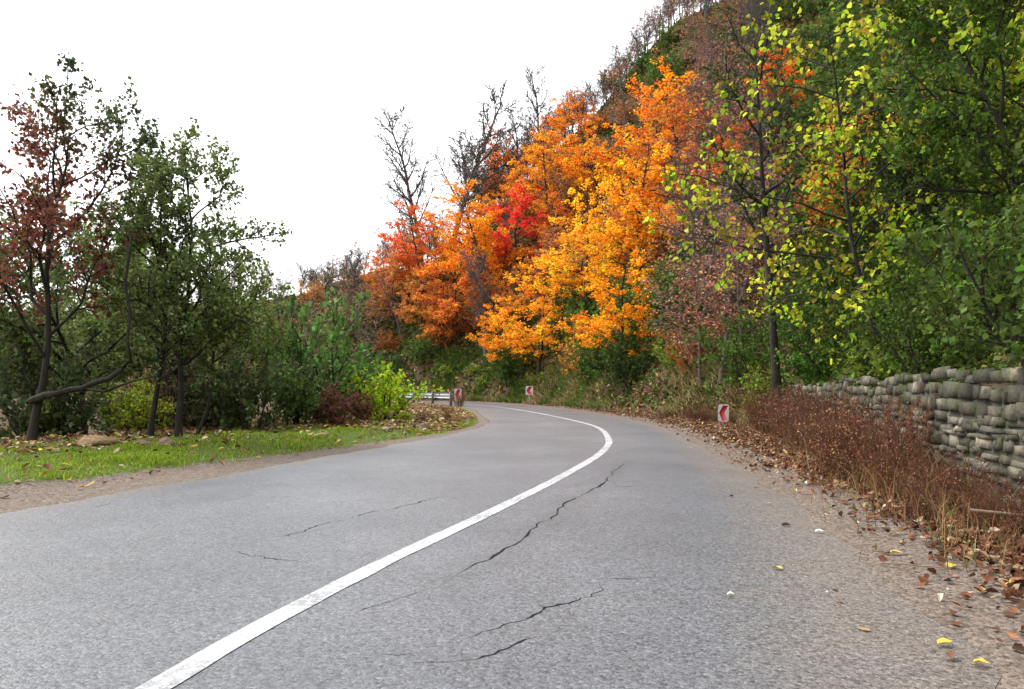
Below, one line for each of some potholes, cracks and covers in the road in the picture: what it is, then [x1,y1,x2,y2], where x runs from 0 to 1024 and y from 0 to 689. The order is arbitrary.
crack [278,496,445,537]
crack [388,577,651,663]
